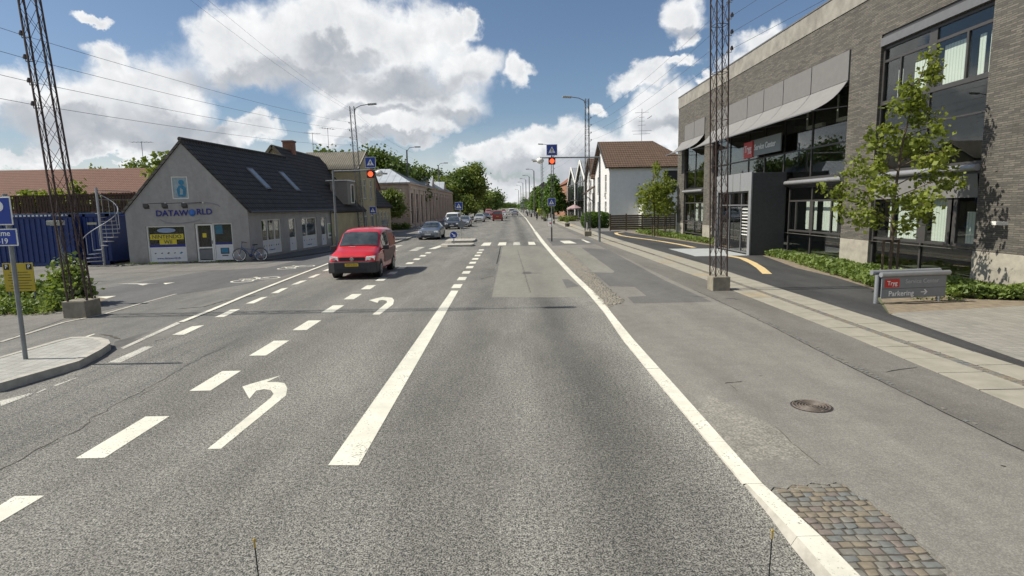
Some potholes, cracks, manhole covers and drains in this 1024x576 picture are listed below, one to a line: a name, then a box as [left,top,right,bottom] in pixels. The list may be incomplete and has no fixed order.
manhole cover [790,399,833,413]
crack [1,348,223,469]
